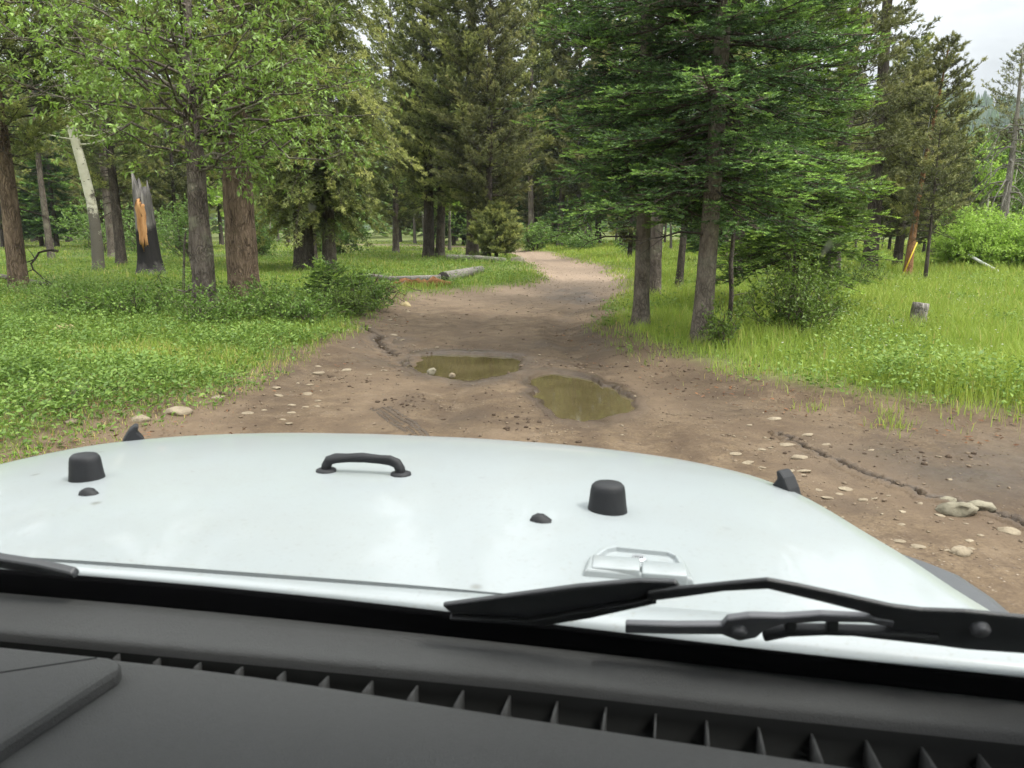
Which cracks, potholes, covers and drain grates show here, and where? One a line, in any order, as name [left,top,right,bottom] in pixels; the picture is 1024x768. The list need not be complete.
pothole [520,367,651,428]
crack [771,430,1024,531]
pothole [391,349,536,385]
crack [355,324,423,367]
